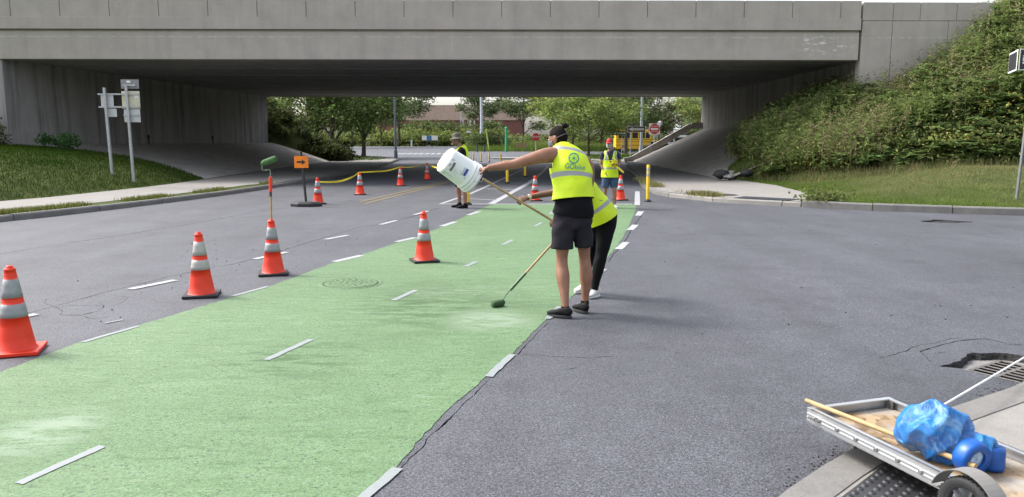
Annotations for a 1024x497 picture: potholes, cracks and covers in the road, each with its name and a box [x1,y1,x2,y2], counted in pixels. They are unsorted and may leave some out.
crack [881,338,1015,359]
pothole [940,353,1024,370]
drain grate [968,360,1024,382]
manhole cover [318,277,383,289]
crack [401,379,489,468]
